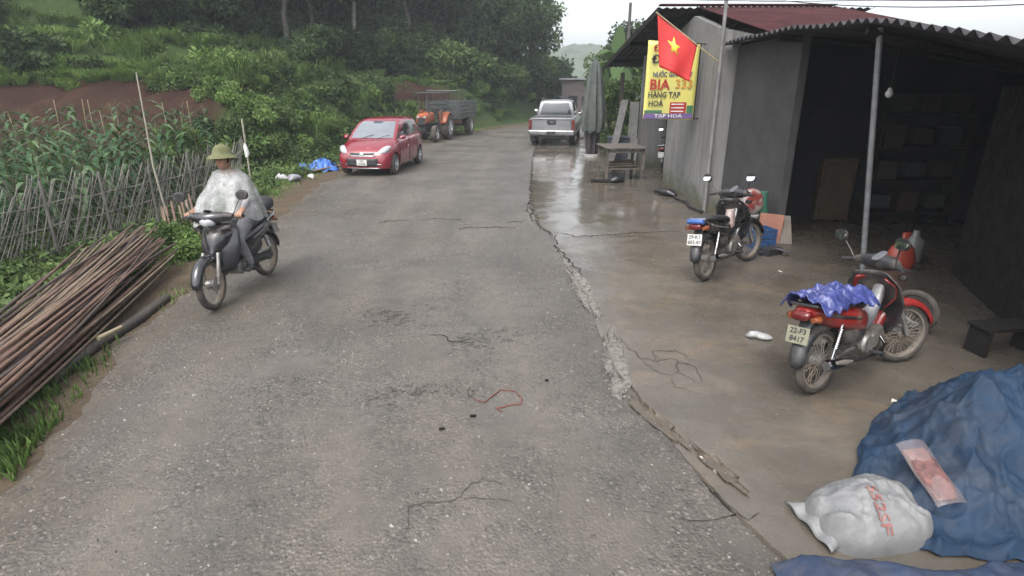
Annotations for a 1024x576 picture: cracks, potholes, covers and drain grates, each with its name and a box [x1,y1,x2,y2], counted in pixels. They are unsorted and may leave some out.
crack [407,478,510,527]
crack [613,335,703,392]
crack [432,327,518,354]
